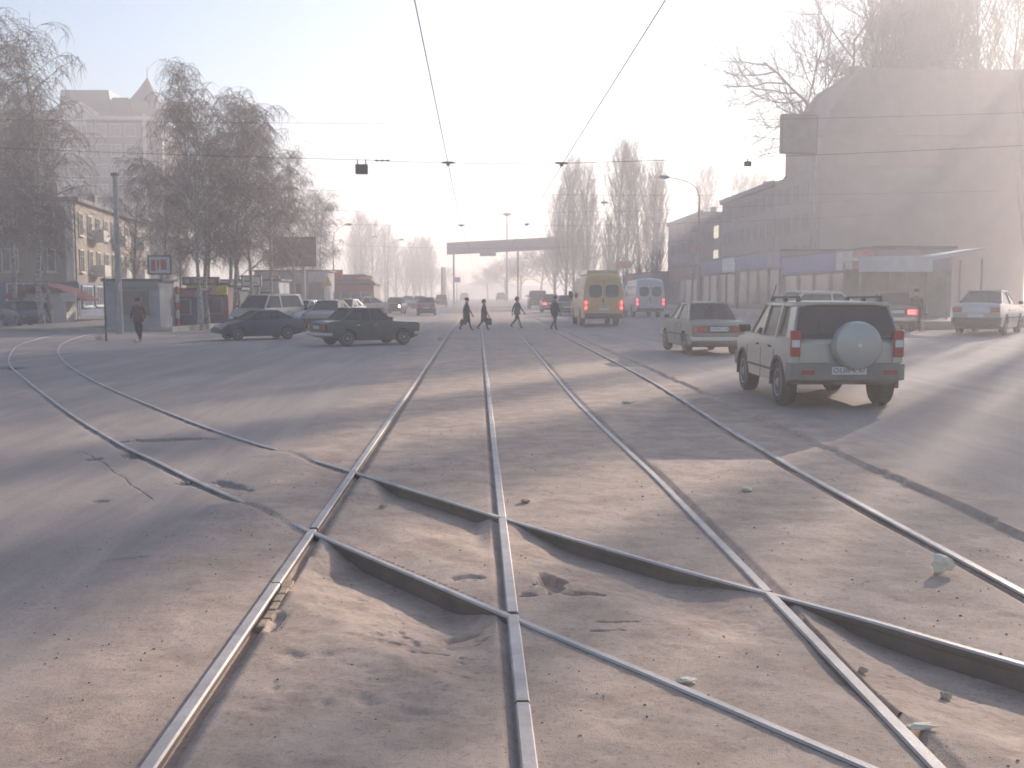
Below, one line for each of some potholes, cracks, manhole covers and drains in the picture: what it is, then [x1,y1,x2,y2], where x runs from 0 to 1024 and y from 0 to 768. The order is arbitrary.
crack [76,451,160,501]
crack [581,618,647,634]
pothole [204,479,258,493]
